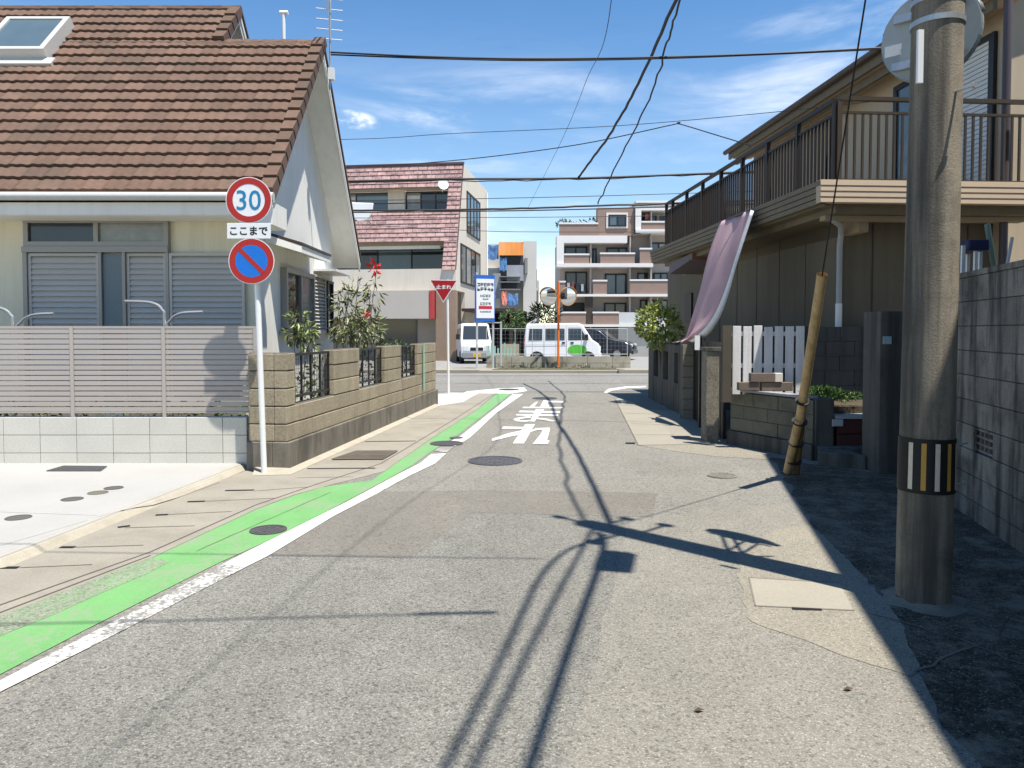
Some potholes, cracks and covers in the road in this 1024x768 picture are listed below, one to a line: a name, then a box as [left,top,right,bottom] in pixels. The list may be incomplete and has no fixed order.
manhole cover [249,524,287,535]
drain grate [331,450,398,460]
manhole cover [468,456,522,466]
utility cover [749,577,855,611]
